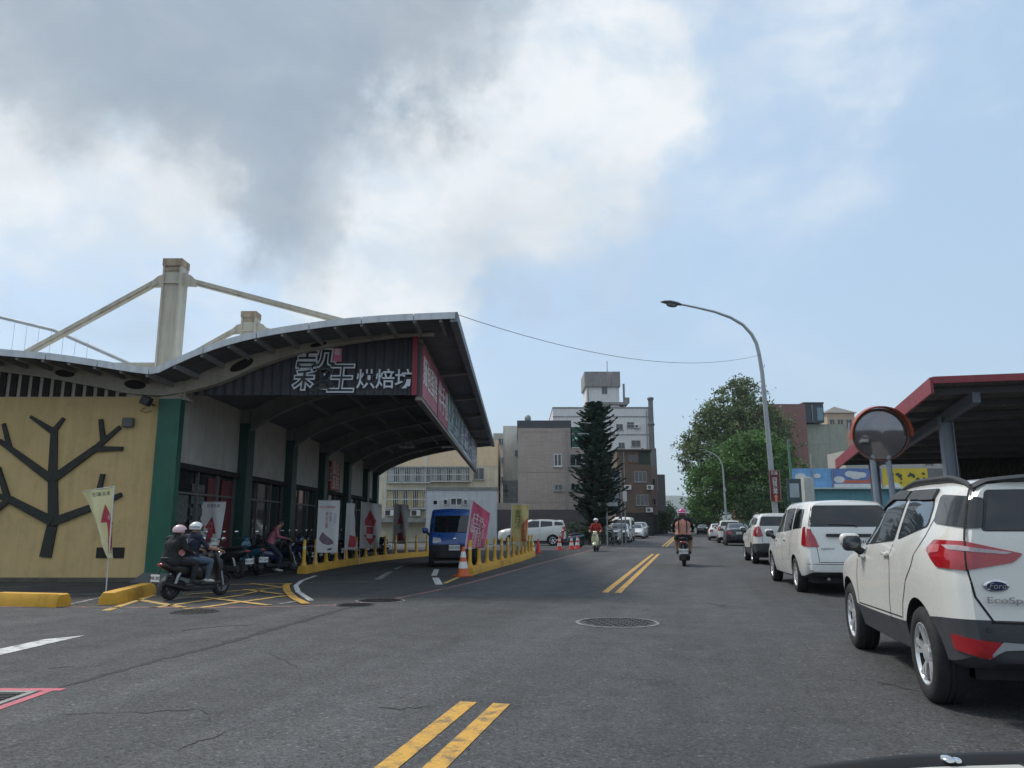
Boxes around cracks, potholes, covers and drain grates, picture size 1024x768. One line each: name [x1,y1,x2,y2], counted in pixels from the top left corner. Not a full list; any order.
manhole cover [576,617,659,628]
